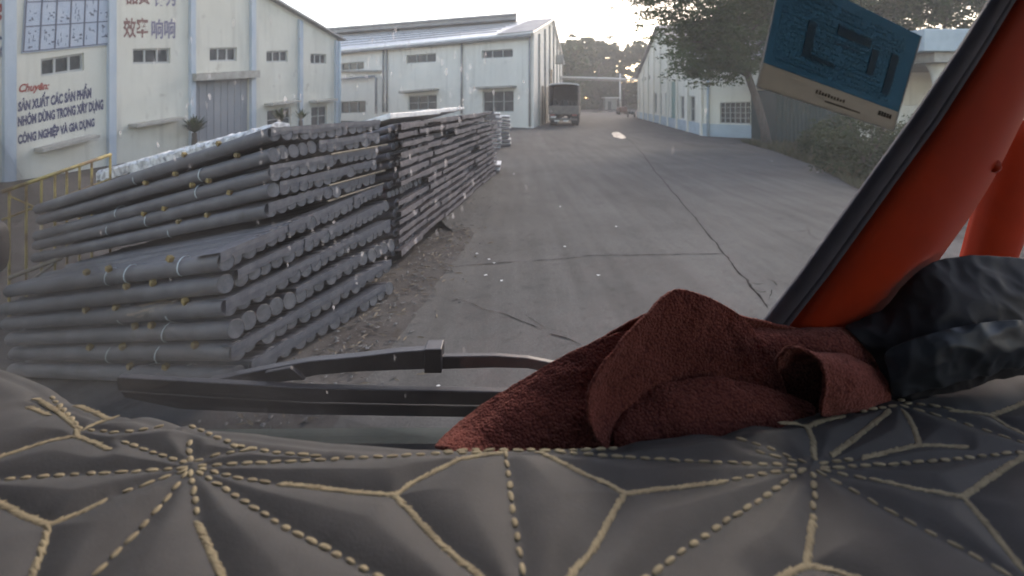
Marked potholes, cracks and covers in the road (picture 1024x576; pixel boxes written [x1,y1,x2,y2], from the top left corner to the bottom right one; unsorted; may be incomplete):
crack [450,297,579,344]
